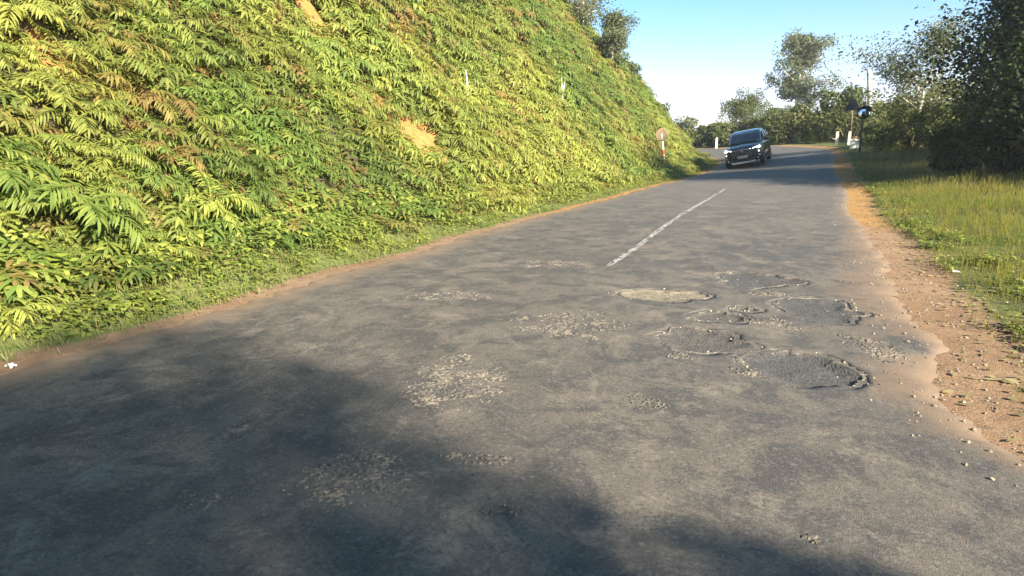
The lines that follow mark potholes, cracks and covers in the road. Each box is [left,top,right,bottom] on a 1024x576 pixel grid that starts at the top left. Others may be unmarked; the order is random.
pothole [771,294,877,325]
pothole [608,288,718,303]
pothole [685,310,751,324]
pothole [730,348,869,389]
pothole [716,271,811,289]
pothole [647,325,767,356]
